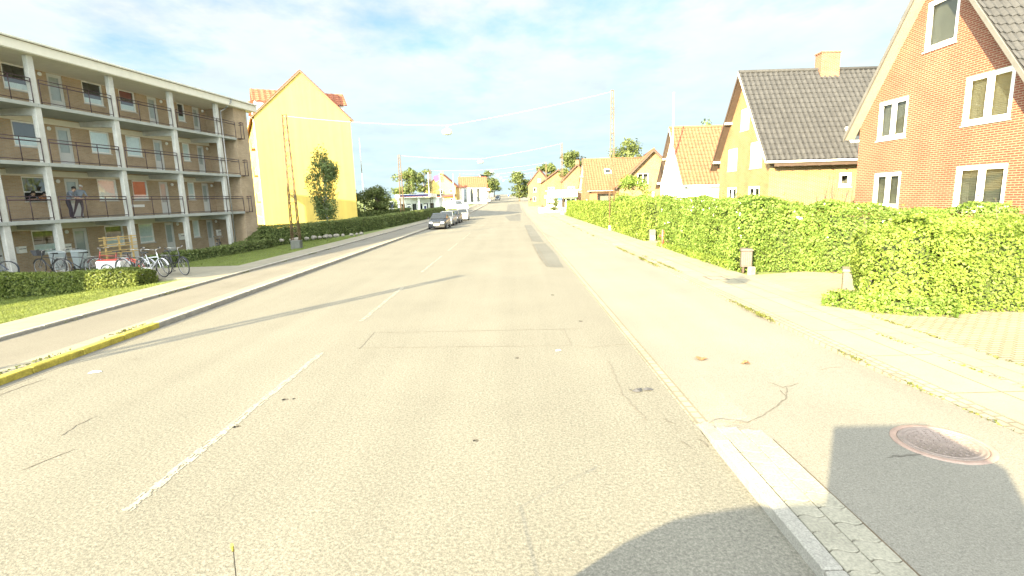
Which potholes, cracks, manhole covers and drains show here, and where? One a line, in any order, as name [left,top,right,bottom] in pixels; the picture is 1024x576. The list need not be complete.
crack [359,328,676,424]
manhole cover [889,425,1000,465]
crack [681,383,799,448]
crack [20,417,93,471]
